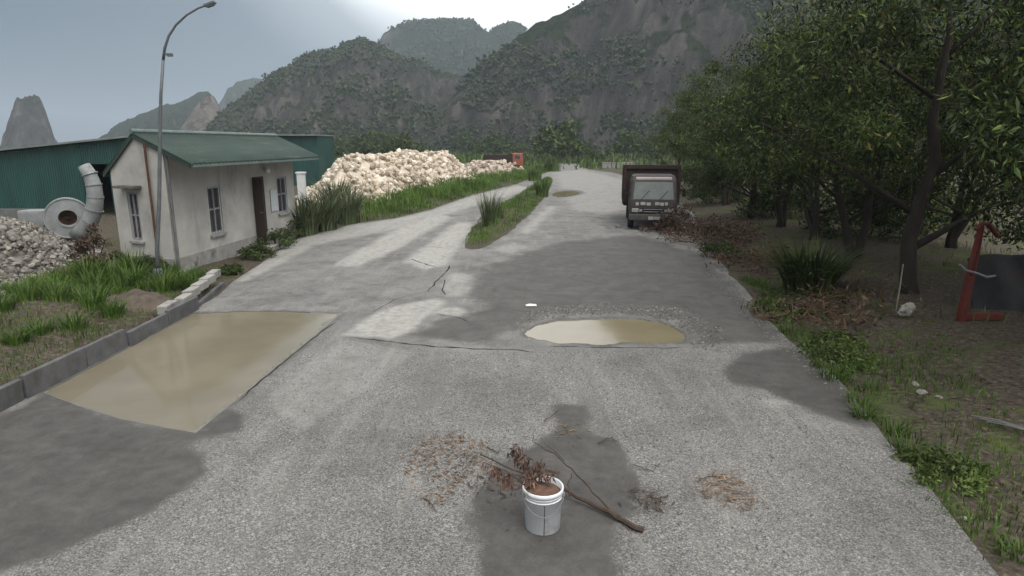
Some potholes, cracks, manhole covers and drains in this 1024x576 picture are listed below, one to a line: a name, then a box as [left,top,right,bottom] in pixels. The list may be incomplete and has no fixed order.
pothole [524,318,686,345]
